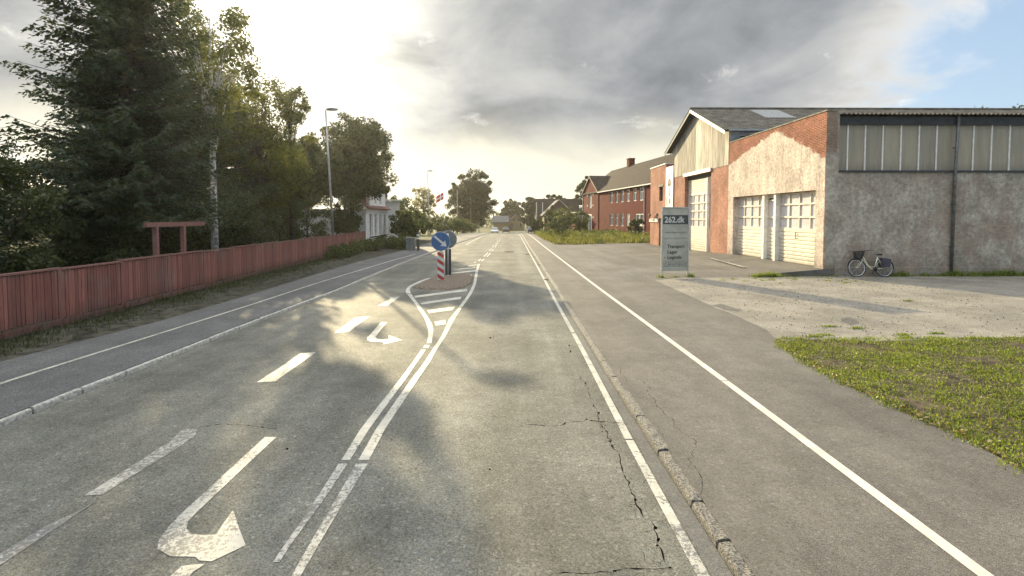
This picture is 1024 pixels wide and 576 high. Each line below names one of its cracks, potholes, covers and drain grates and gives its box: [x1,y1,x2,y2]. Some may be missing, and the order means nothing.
crack [531,376,673,574]
crack [647,386,714,504]
